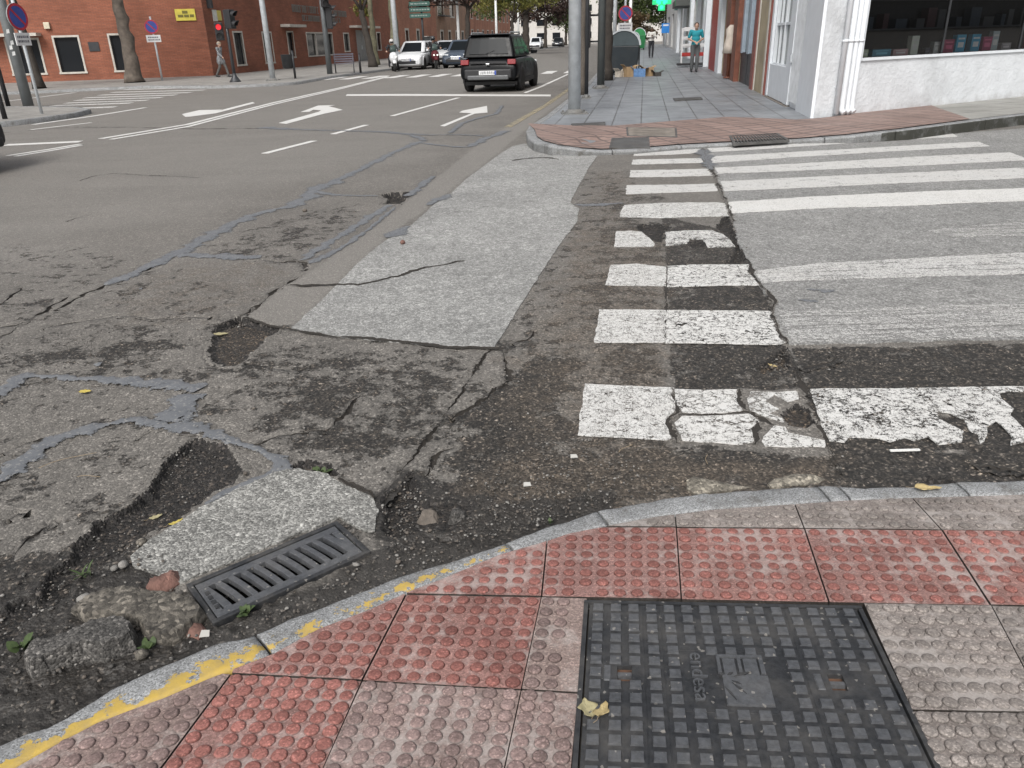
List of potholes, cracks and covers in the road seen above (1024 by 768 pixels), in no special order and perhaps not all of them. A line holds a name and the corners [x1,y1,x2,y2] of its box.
crack [238,396,364,450]
manhole cover [572,600,941,768]
pothole [203,315,286,371]
crack [383,445,460,506]
drain grate [729,133,790,146]
pothole [0,436,252,668]
crack [240,259,465,316]
drain grate [186,521,371,627]
manhole cover [626,127,677,137]
crack [447,331,538,422]
pothole [378,192,418,205]
